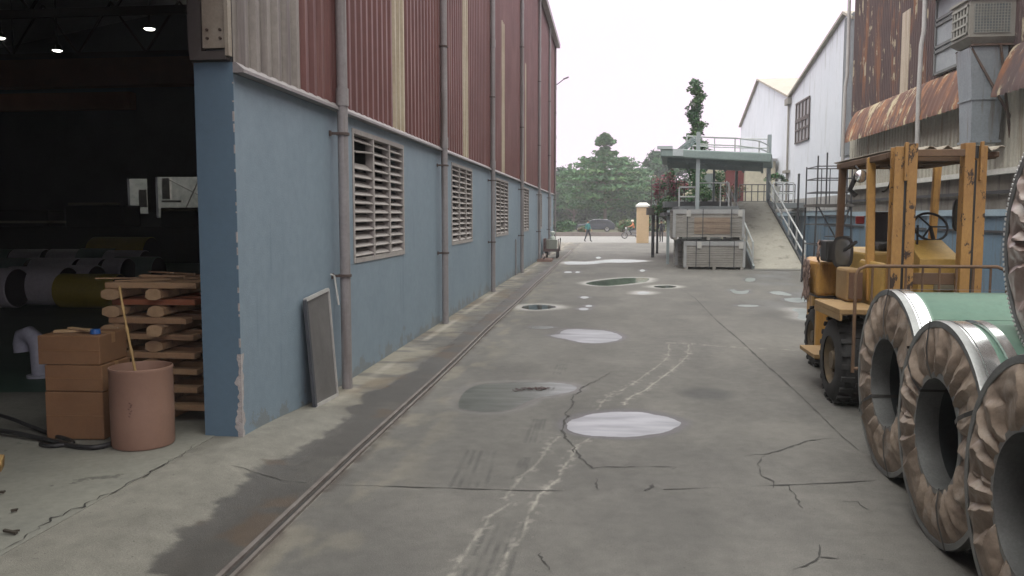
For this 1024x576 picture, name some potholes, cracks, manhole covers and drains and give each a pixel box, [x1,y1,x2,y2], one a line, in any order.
crack [747,438,828,508]
crack [560,374,676,489]
crack [797,544,840,568]
crack [8,451,186,547]
